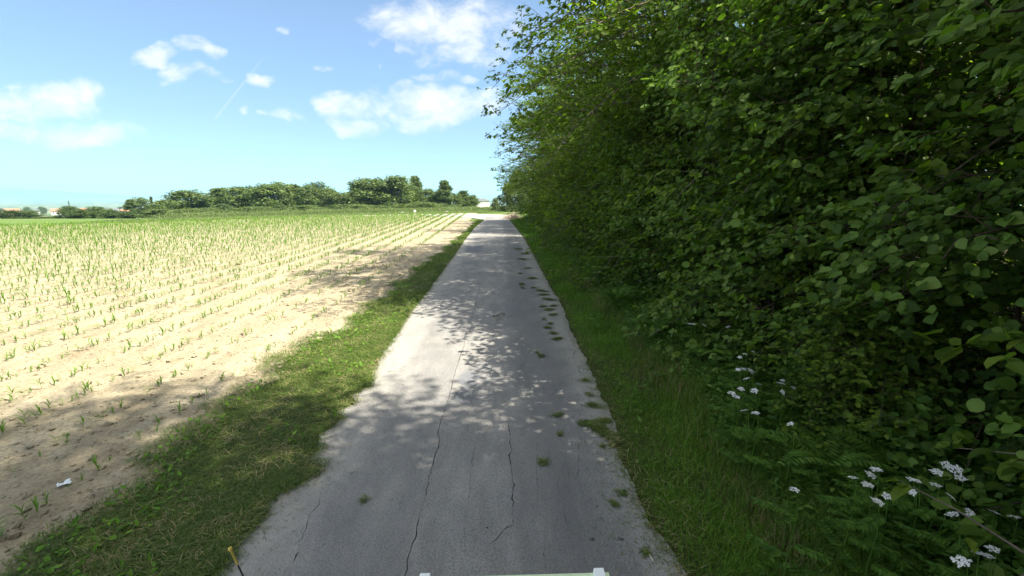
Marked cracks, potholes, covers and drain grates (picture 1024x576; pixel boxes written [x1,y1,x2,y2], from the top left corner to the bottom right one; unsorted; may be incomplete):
crack [405,296,492,573]
